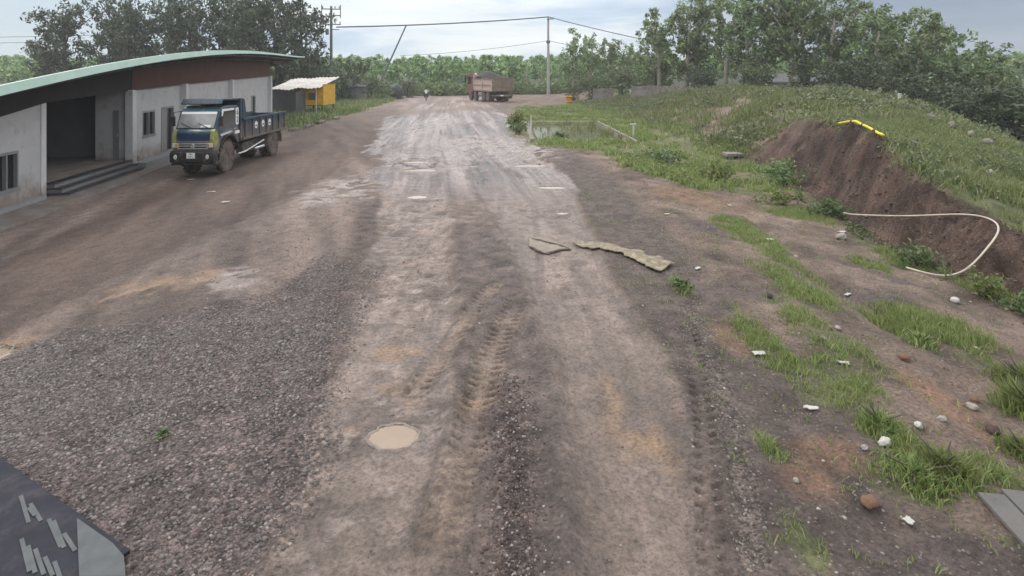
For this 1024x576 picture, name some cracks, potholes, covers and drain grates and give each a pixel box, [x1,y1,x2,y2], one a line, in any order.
pothole [364,422,421,450]
